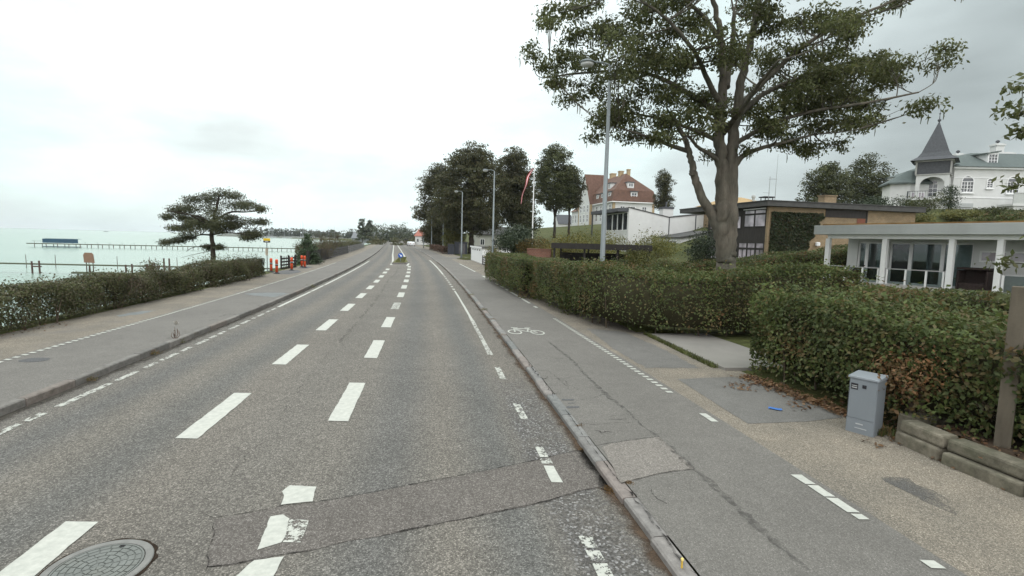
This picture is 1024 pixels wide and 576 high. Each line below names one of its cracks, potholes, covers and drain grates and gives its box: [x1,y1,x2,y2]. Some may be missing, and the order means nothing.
manhole cover [37,538,158,576]
